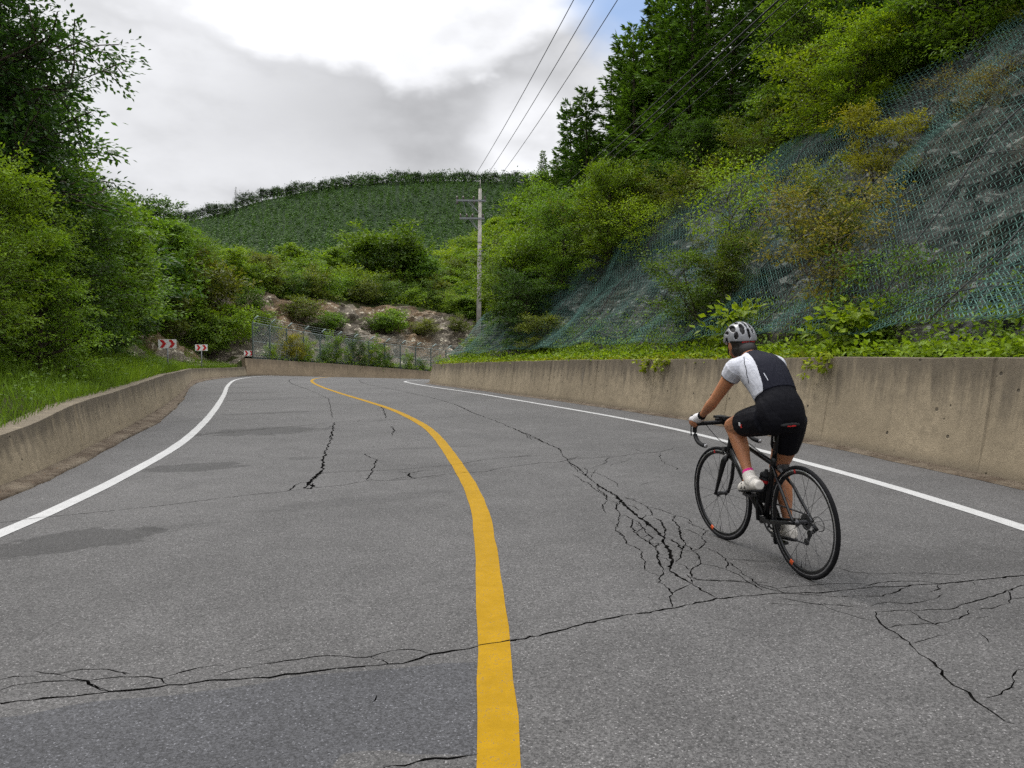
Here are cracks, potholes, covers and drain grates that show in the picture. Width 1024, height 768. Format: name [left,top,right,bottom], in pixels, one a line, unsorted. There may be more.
crack [0,379,1024,724]
